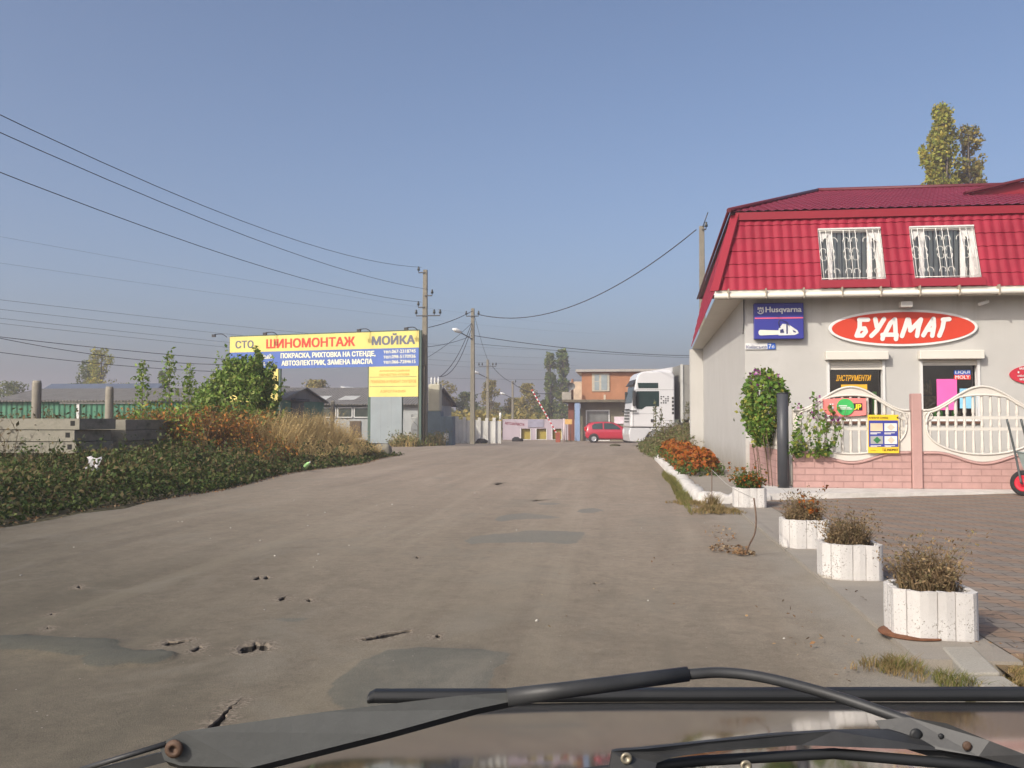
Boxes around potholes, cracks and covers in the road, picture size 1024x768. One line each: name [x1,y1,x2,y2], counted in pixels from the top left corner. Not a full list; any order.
pothole [236,642,271,653]
crack [361,630,412,641]
crack [208,699,241,728]
